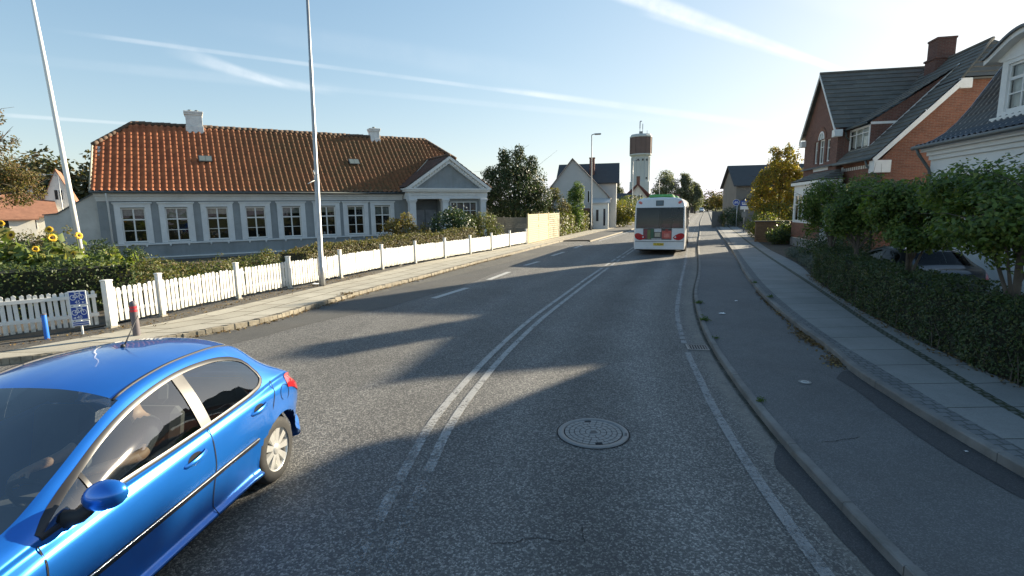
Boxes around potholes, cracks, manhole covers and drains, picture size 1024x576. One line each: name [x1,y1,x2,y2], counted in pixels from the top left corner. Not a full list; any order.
manhole cover [557,418,630,449]
